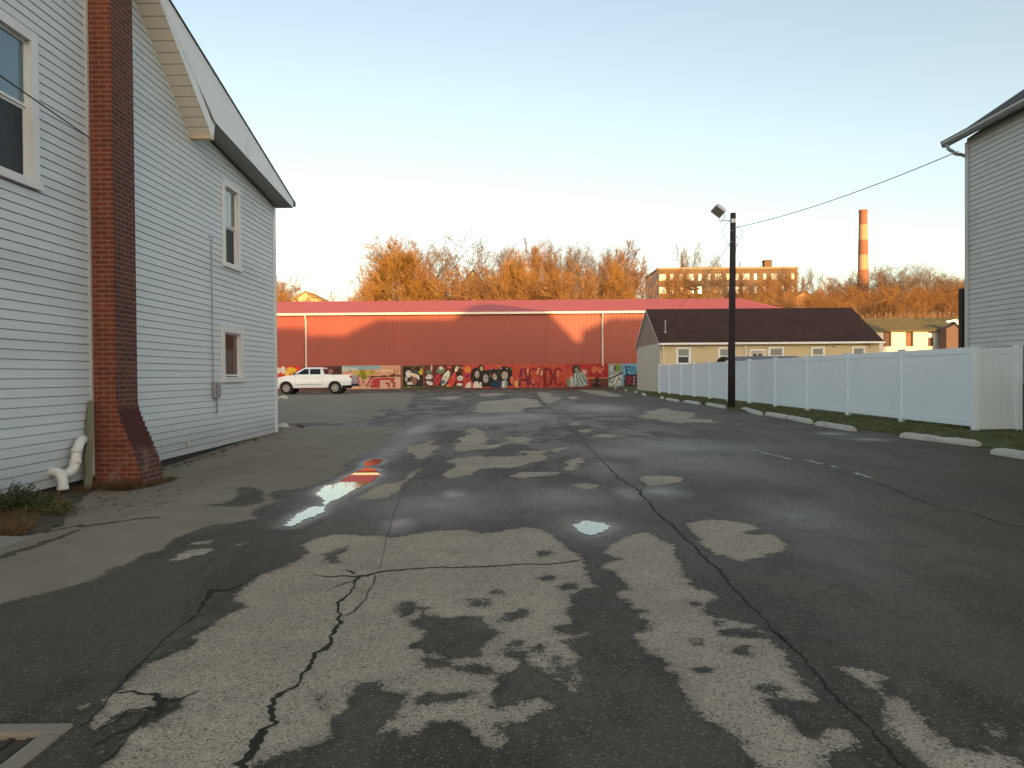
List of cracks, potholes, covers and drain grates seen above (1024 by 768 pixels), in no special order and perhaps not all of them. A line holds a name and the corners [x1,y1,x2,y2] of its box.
crack [93,690,199,764]
drain grate [0,723,74,768]
crack [232,560,577,768]
